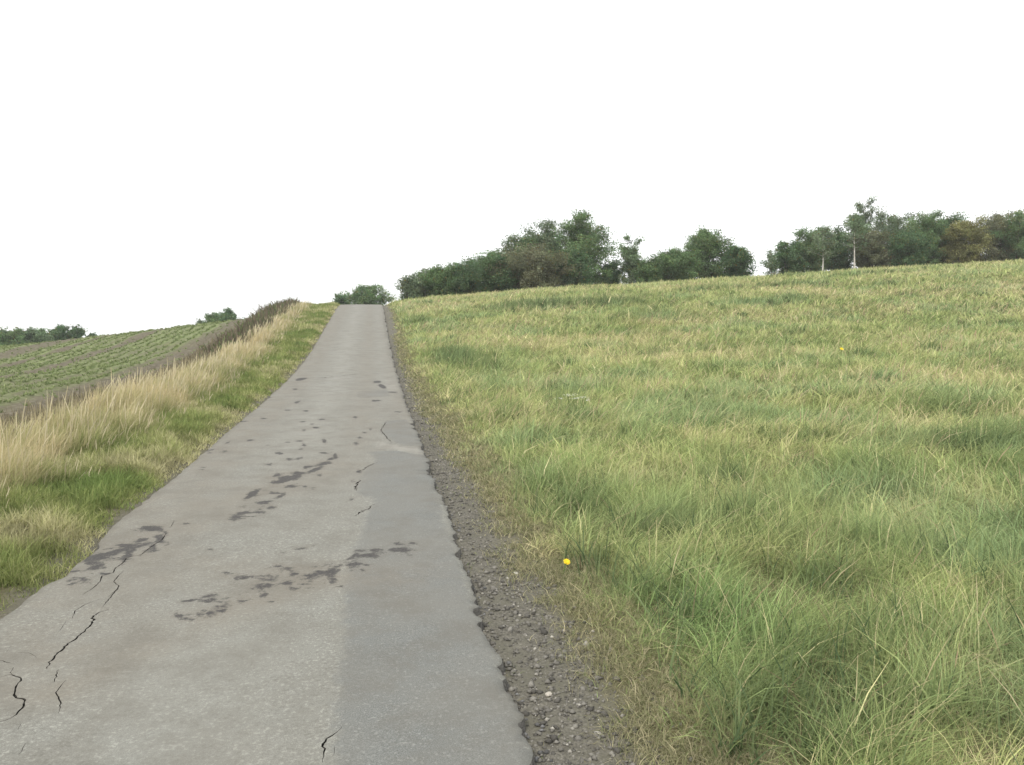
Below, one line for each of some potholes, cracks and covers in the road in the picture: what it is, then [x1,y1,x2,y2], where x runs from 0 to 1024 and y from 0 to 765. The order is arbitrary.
crack [321,727,342,762]
crack [0,522,174,754]
